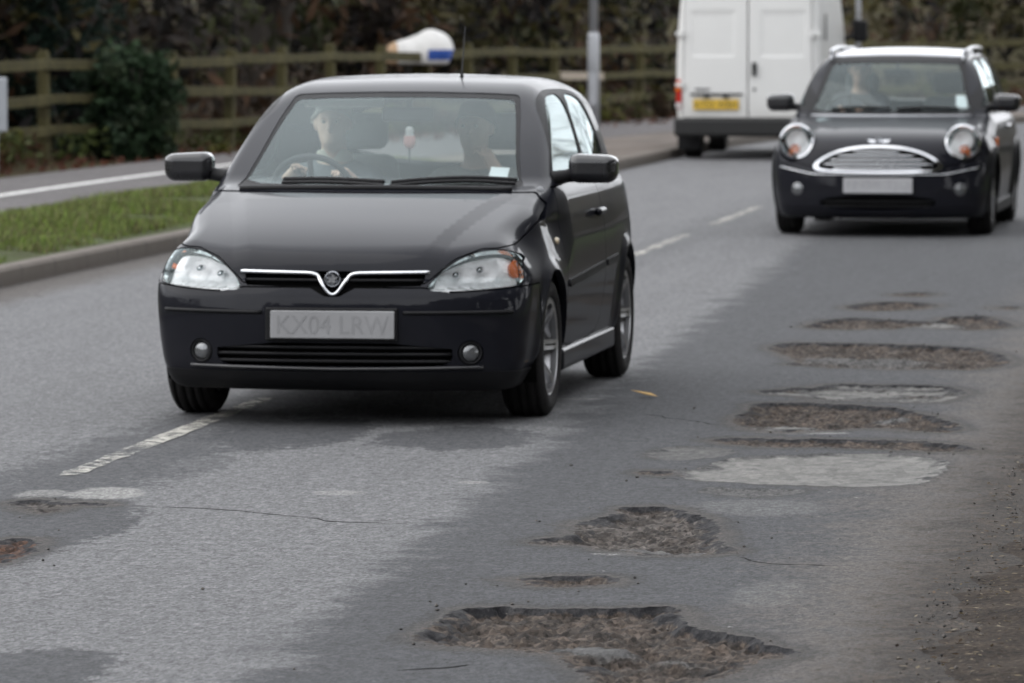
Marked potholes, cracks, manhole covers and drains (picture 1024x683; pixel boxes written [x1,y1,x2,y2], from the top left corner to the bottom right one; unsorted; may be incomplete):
pothole [803,316,1016,330]
crack [737,556,831,566]
pothole [842,302,938,311]
pothole [516,575,621,588]
pothole [708,438,974,452]
pothole [766,342,1012,371]
crack [152,506,402,524]
pothole [6,499,108,514]
pothole [411,606,801,683]
pothole [730,402,964,433]
pothole [756,384,969,403]
pothole [528,506,738,556]
